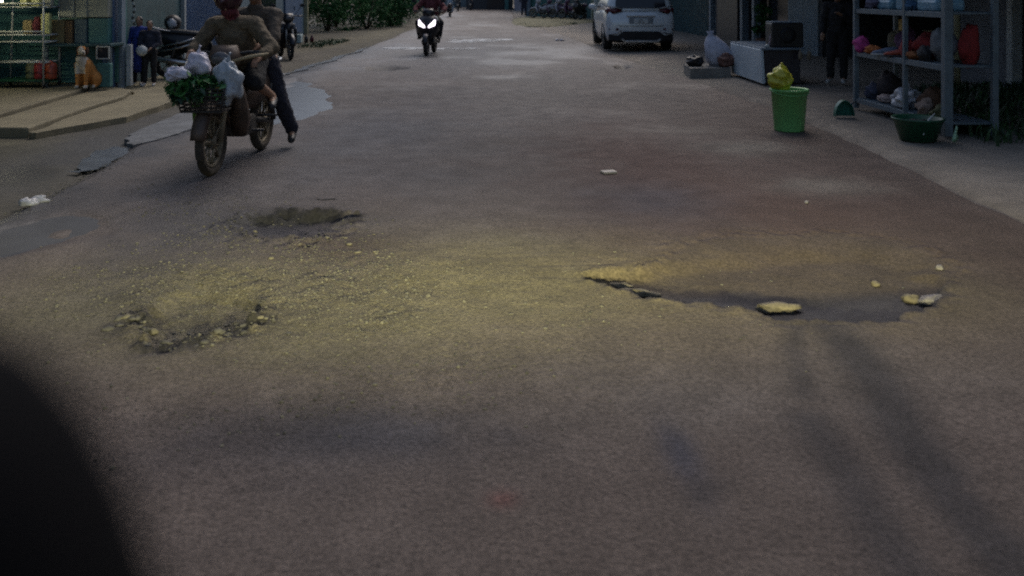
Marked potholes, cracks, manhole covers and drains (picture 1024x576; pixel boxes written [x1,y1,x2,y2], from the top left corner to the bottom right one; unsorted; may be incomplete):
pothole [136,264,275,354]
pothole [214,207,364,245]
pothole [580,228,964,327]
